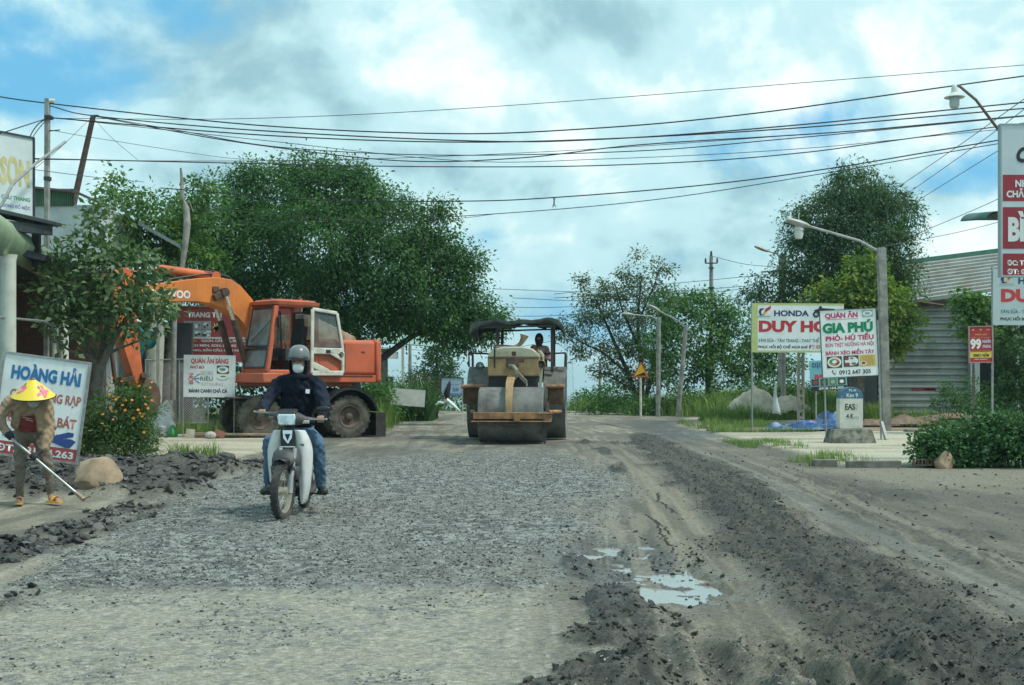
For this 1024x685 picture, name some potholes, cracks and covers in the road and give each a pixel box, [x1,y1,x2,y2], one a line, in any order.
crack [645,492,678,555]
pothole [559,533,735,606]
